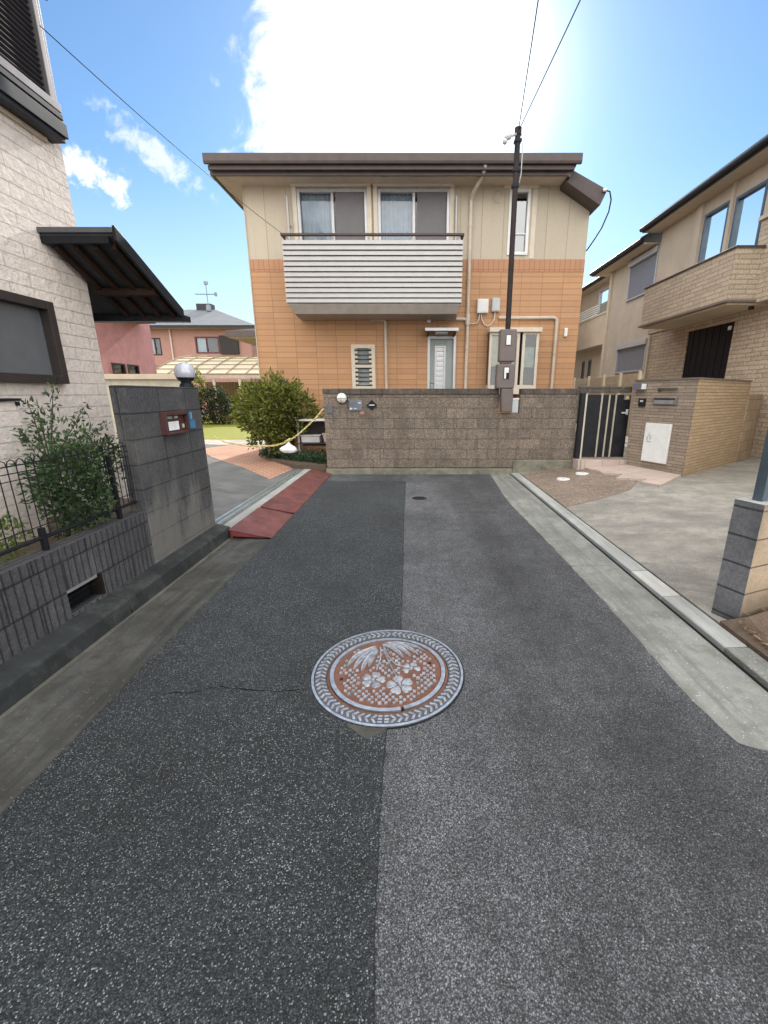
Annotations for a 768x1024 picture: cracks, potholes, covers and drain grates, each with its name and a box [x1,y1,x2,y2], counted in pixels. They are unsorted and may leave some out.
manhole cover [310,630,465,730]
